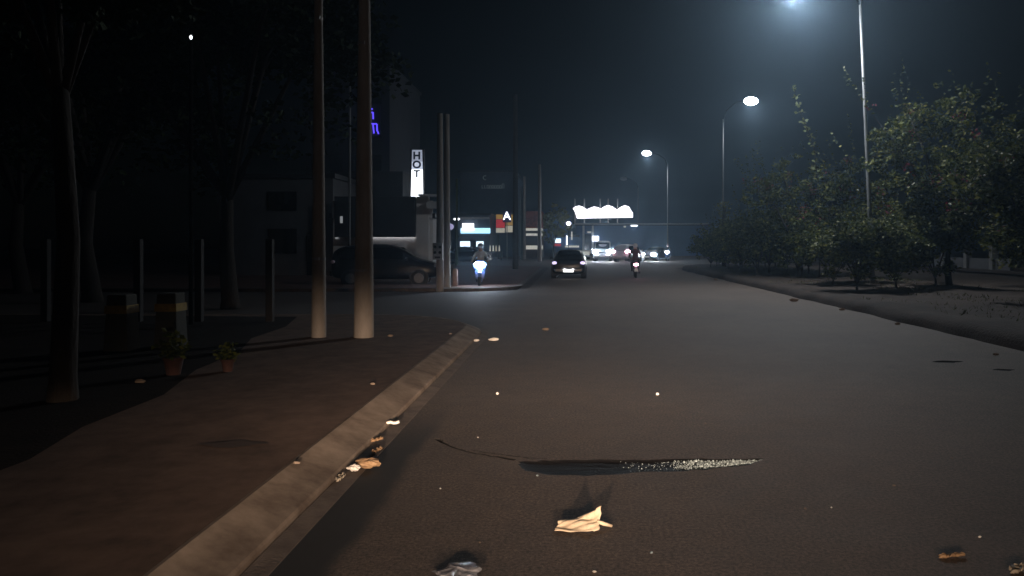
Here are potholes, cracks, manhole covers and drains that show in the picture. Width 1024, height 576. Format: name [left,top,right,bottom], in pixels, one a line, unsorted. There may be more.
pothole [518,458,764,476]
crack [435,438,547,460]
